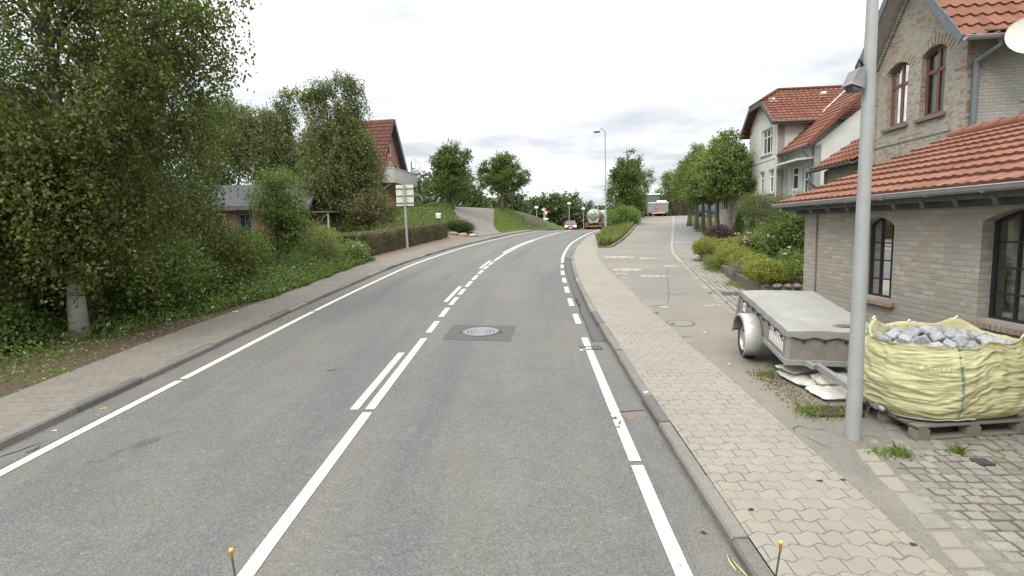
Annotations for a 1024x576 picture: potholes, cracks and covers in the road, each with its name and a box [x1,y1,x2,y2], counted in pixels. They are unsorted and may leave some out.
manhole cover [460,327,502,336]
utility cover [969,458,996,466]
